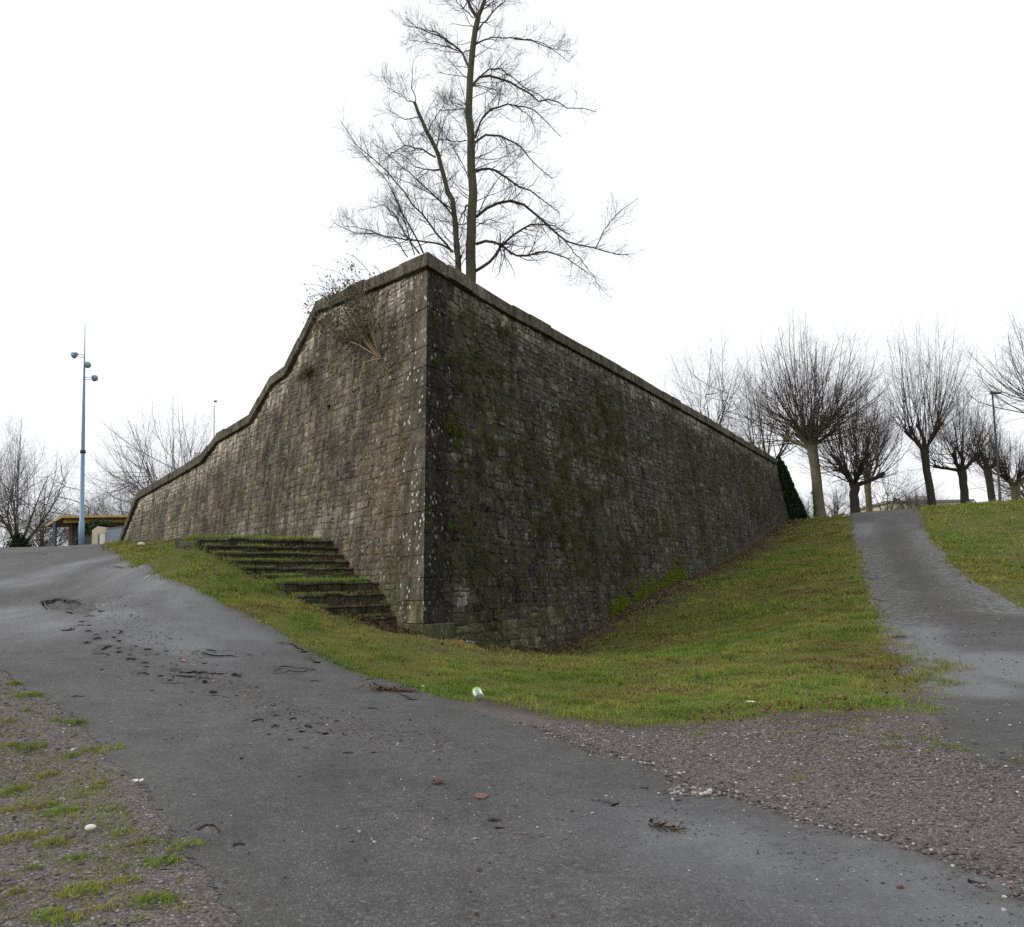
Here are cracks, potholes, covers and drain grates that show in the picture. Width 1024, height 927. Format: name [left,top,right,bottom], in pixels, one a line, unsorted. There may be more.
pothole [44,597,96,616]
